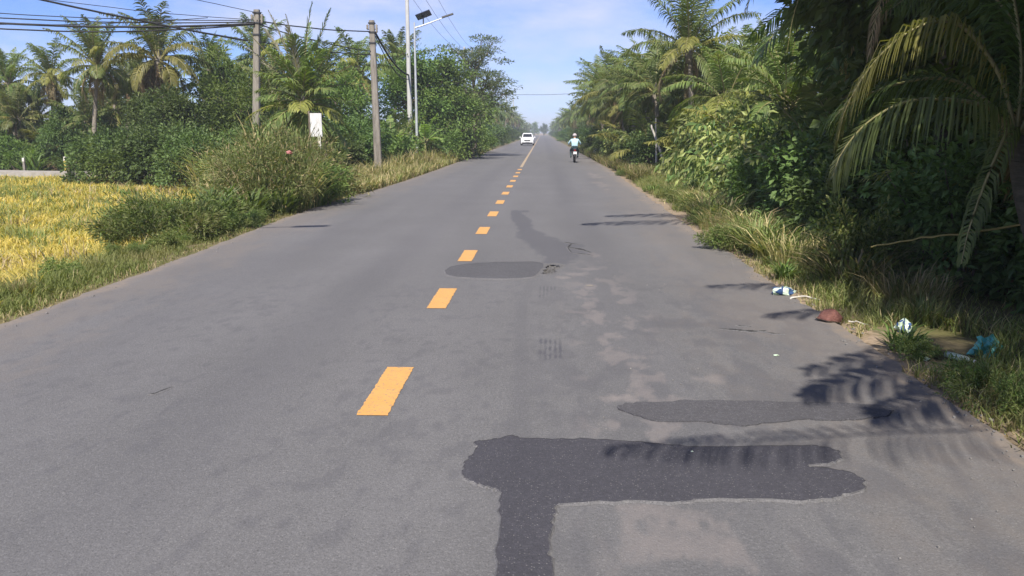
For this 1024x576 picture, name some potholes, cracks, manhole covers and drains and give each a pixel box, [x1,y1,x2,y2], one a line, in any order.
crack [719,325,785,335]
crack [147,386,173,396]
pothole [539,263,565,277]
crack [563,242,592,256]
